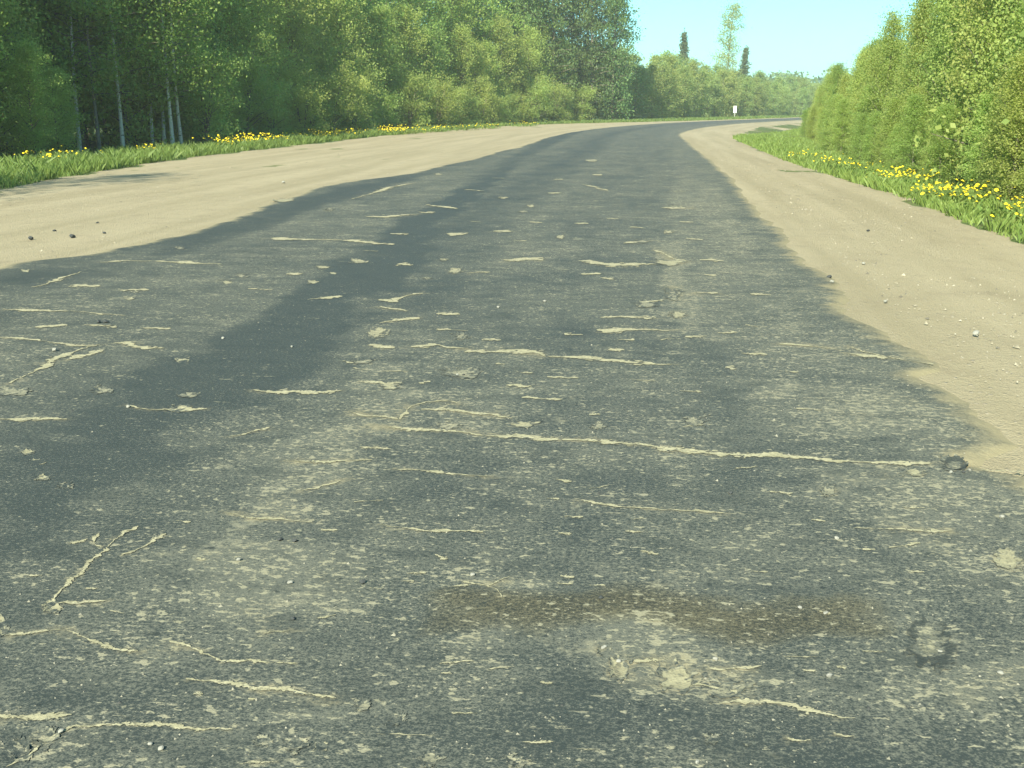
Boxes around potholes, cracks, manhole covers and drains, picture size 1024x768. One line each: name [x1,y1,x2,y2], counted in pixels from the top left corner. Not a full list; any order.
crack [0,309,171,383]
pothole [905,616,958,674]
crack [253,293,930,535]
crack [28,520,191,613]
crack [169,640,336,700]
crack [0,712,232,766]
crack [272,183,480,251]
pothole [937,454,969,471]
